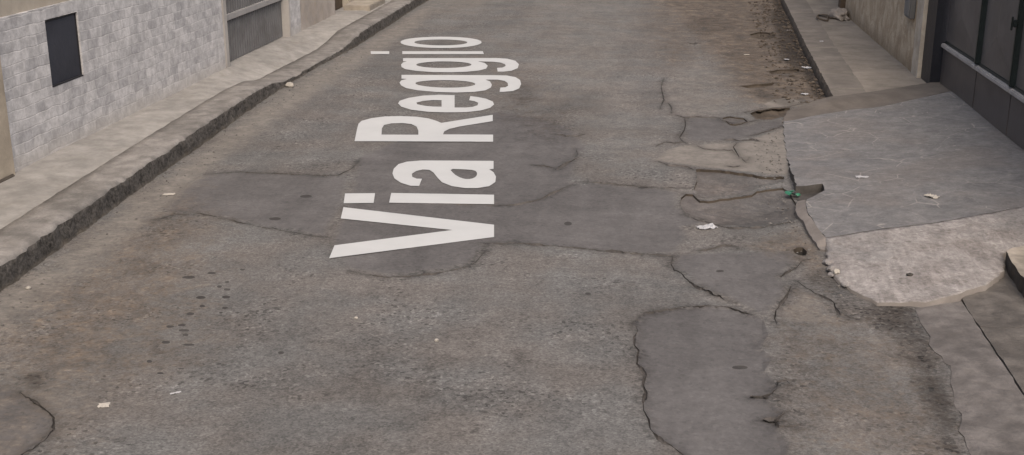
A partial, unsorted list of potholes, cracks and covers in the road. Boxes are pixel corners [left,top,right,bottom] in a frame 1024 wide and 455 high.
crack [657,79,802,170]
crack [750,380,802,428]
crack [159,213,328,238]
crack [499,134,673,206]
crack [357,243,749,455]
crack [685,215,795,252]
pothole [750,32,776,40]
pothole [750,108,790,120]
crack [774,261,856,324]
crack [216,160,359,176]
pothole [722,116,748,126]
